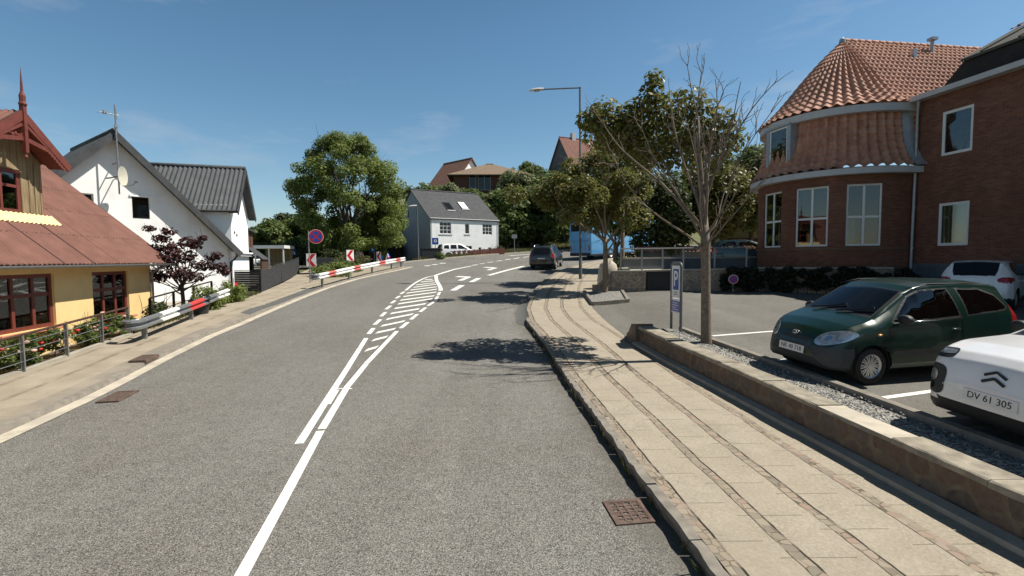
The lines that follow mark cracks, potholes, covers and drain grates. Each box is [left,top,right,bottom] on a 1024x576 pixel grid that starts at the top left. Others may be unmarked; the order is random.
drain grate [602,498,657,526]
manhole cover [128,354,159,363]
